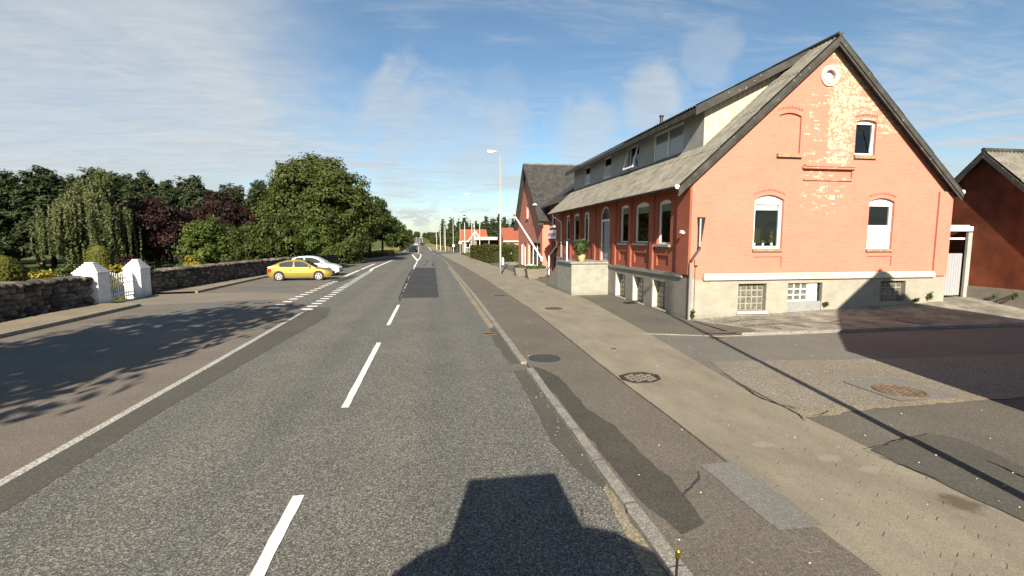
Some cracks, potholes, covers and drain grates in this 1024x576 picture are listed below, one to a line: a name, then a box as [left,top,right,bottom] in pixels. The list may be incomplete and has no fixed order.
manhole cover [529,354,561,363]
crack [738,383,828,419]
crack [682,471,700,496]
manhole cover [619,372,661,383]
manhole cover [844,378,960,401]
